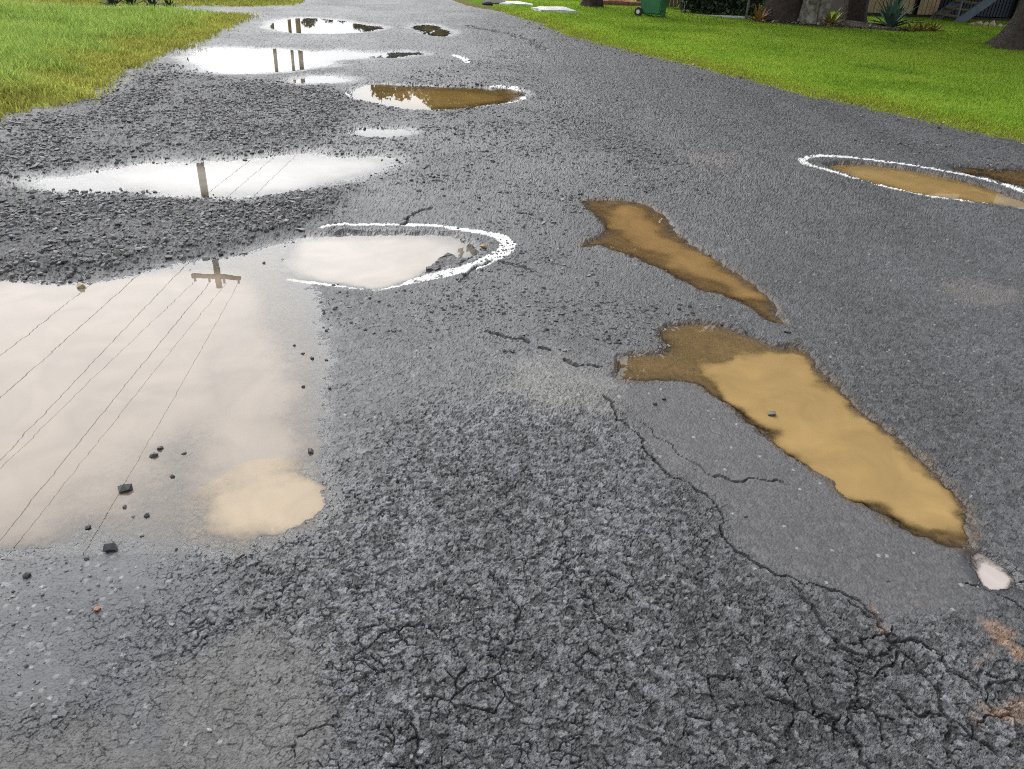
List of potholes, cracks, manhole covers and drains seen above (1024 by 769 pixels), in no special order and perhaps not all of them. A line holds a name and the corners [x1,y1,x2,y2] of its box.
crack [485,329,602,368]
pothole [612,317,981,551]
crack [276,465,746,769]
pothole [347,81,528,110]
pothole [270,17,388,34]
pothole [826,159,1024,209]
crack [603,394,1024,769]
pothole [351,125,414,138]
pothole [411,24,453,37]
pothole [0,239,343,562]
pothole [273,228,486,291]
pothole [186,47,425,74]
